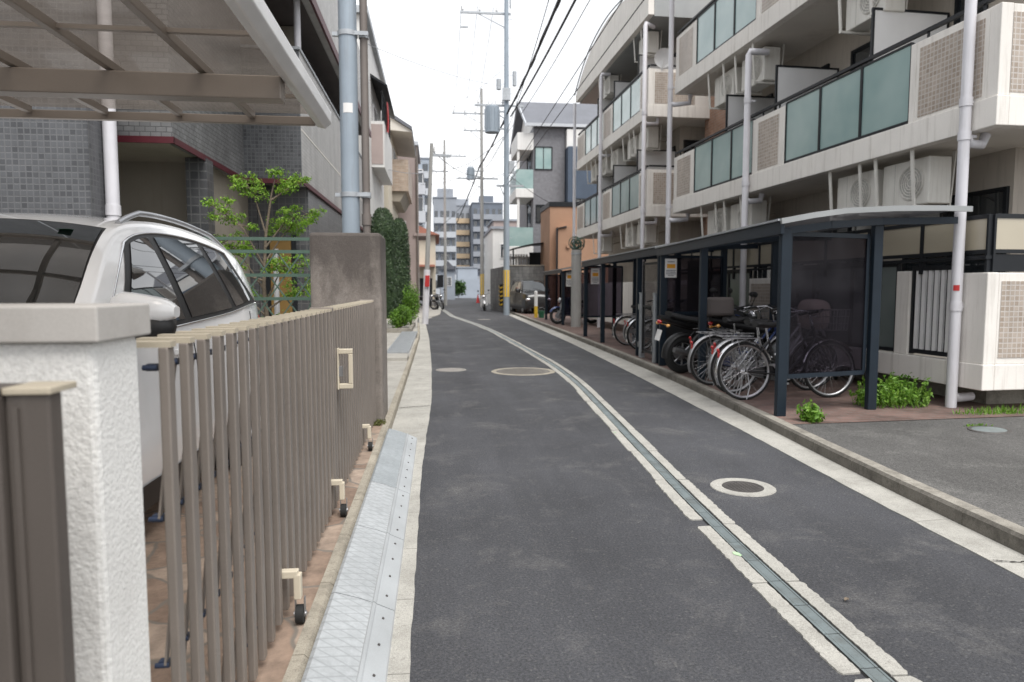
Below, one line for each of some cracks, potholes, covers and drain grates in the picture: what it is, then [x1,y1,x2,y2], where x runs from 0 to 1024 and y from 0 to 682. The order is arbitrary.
manhole cover [710,478,776,497]
manhole cover [491,367,555,376]
